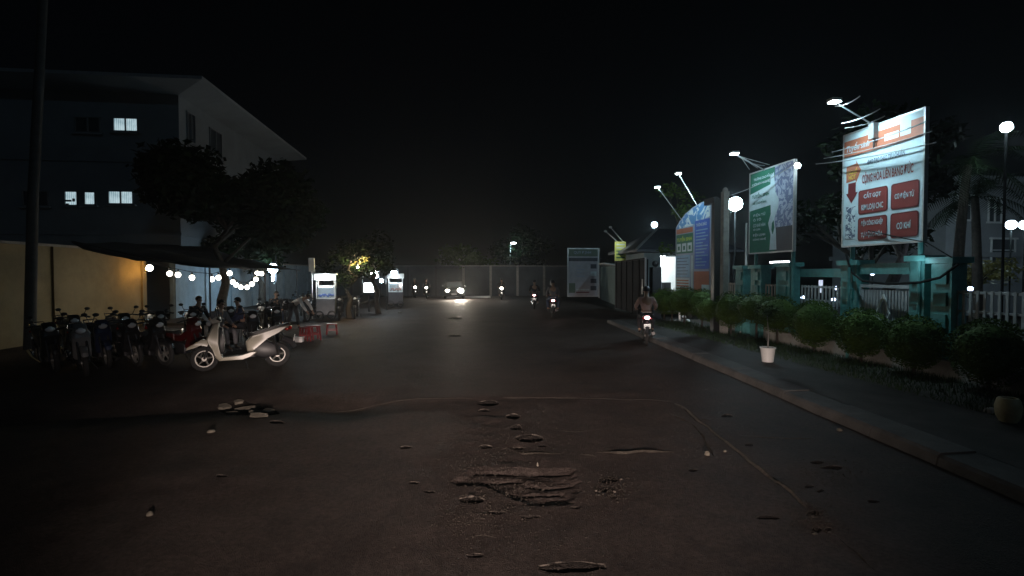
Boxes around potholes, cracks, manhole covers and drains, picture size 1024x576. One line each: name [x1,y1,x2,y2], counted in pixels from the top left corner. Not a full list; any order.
pothole [537,561,607,574]
crack [586,398,714,456]
pothole [515,434,544,443]
pothole [217,401,280,415]
crack [581,449,672,457]
pothole [449,466,583,507]
